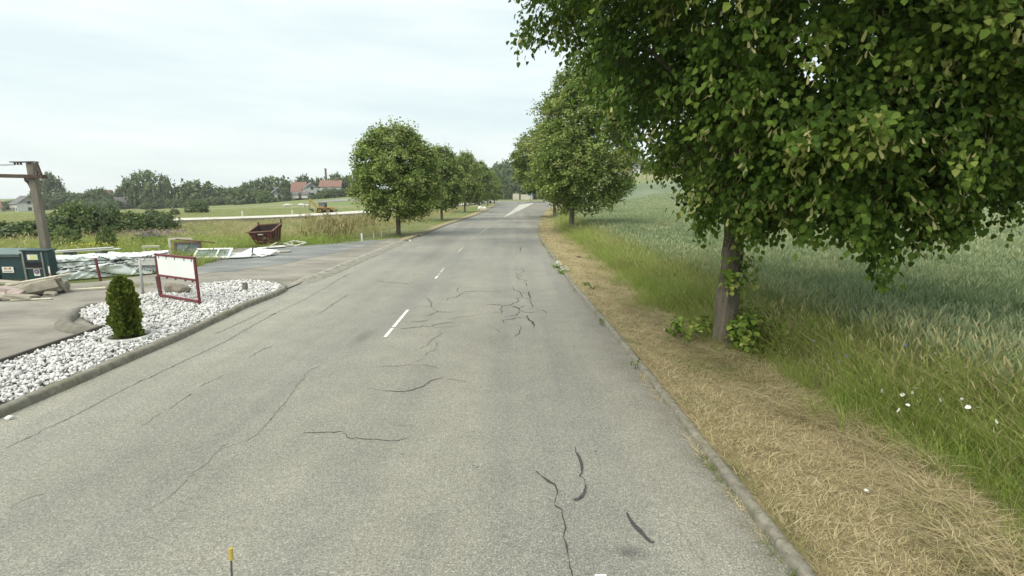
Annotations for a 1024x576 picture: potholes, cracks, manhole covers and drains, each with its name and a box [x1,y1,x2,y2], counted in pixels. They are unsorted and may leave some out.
crack [303,424,410,441]
crack [500,470,573,576]
crack [150,367,317,509]
crack [371,231,547,392]
